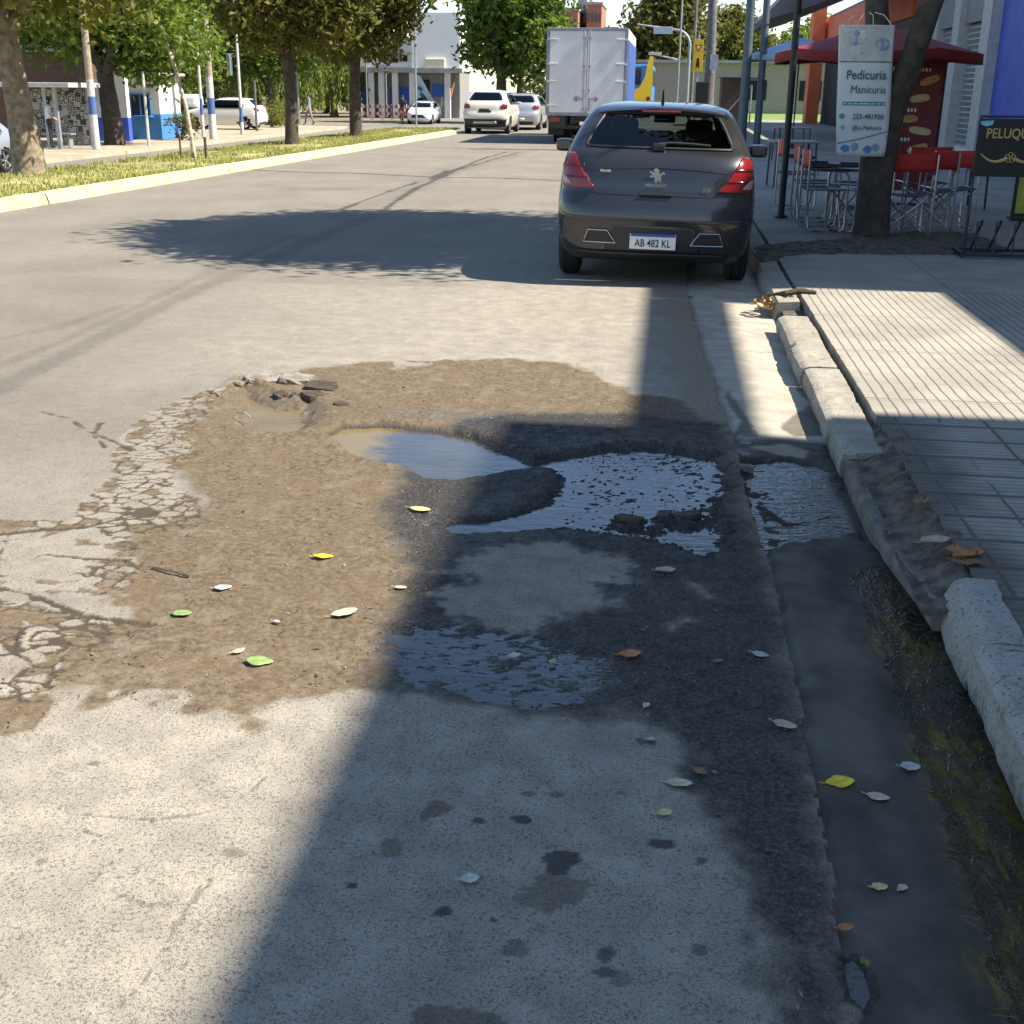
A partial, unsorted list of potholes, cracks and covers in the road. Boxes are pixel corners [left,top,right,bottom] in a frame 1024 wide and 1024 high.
pothole [320,419,749,563]
crack [0,391,220,706]
